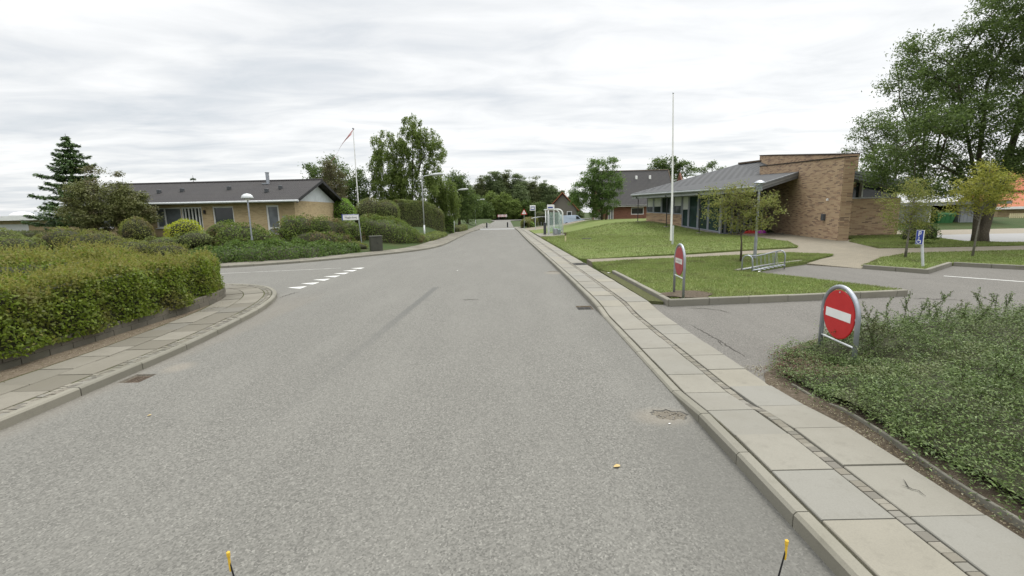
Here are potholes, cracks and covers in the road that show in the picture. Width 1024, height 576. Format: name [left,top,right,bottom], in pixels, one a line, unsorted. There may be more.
pothole [650,409,689,420]
drain grate [118,374,156,383]
